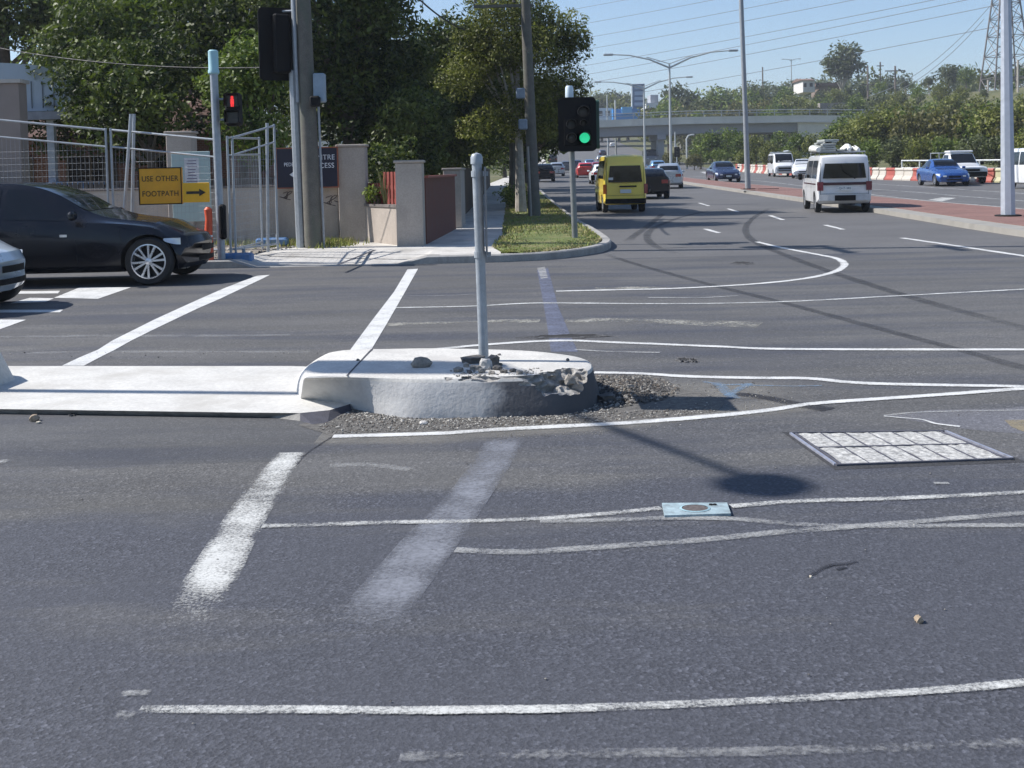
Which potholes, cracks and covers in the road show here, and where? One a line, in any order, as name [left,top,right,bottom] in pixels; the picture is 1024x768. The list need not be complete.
utility cover [662,502,731,518]
crack [808,561,858,577]
